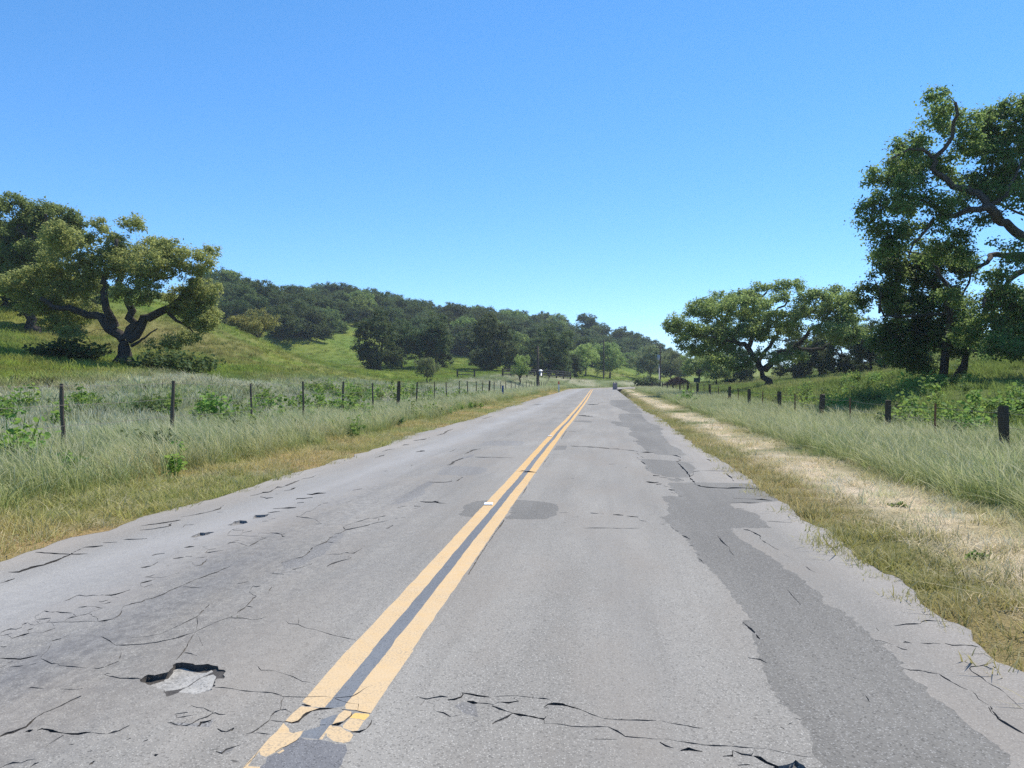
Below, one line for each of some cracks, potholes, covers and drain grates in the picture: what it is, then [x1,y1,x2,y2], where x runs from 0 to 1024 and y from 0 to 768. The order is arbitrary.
crack [168,667,372,768]
crack [0,475,359,679]
pothole [140,662,226,697]
crack [416,693,809,768]
crack [0,687,158,768]
crack [521,431,754,496]
crack [281,501,439,570]
crack [875,620,1024,734]
